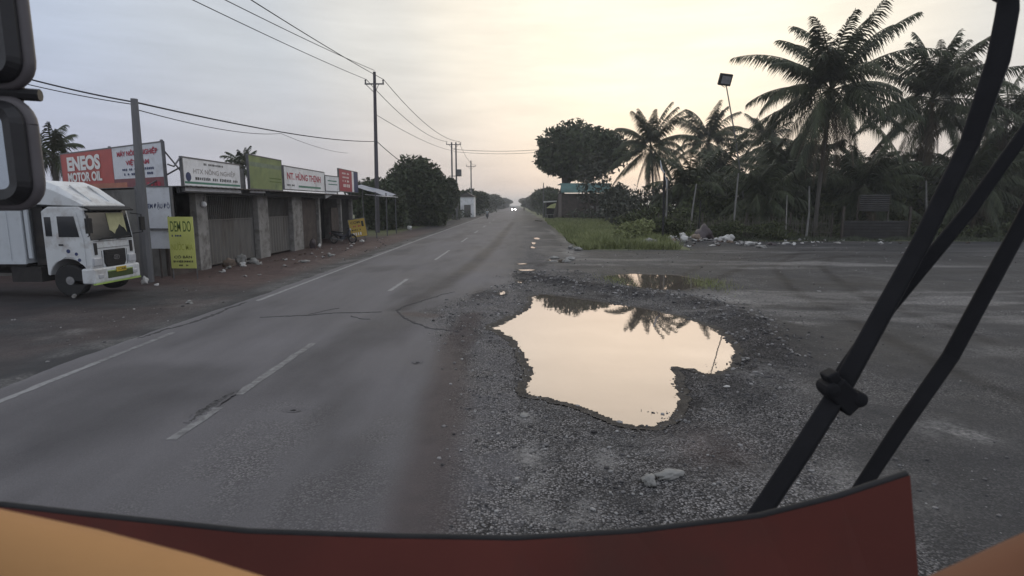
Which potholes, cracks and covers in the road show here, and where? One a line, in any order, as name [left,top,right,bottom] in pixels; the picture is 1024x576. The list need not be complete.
crack [395,292,458,332]
pothole [485,294,745,430]
pothole [602,273,708,291]
